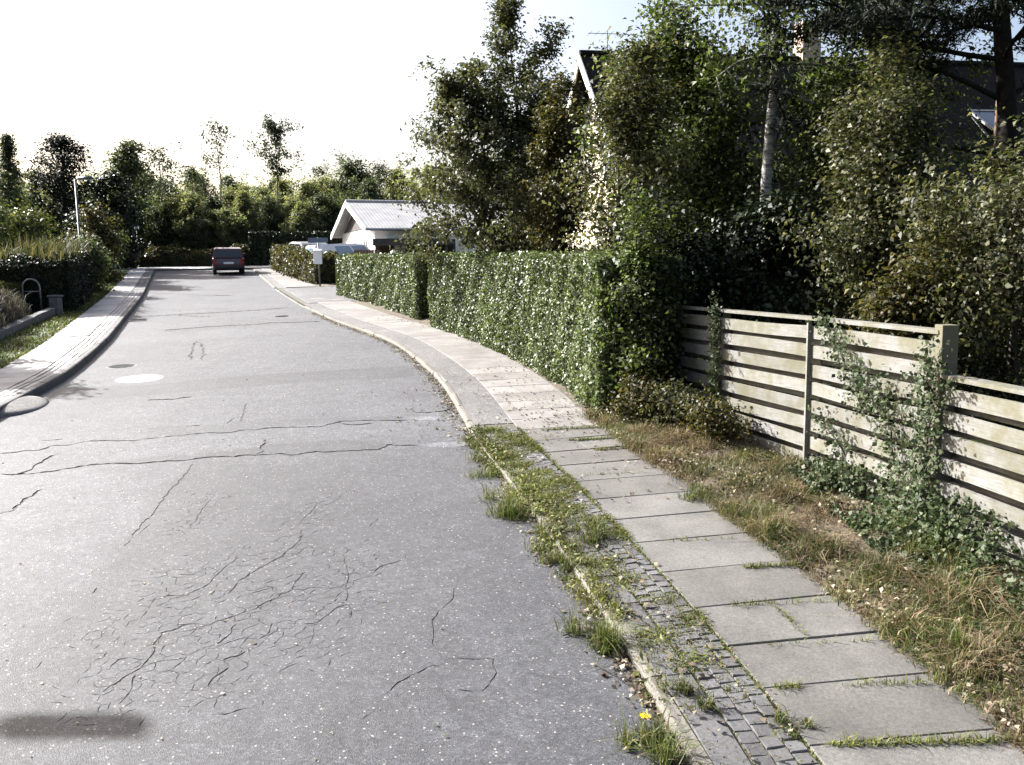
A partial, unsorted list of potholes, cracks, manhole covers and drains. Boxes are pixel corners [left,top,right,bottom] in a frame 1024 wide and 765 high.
crack [363,591,497,719]
manhole cover [115,375,163,383]
crack [0,404,417,514]
